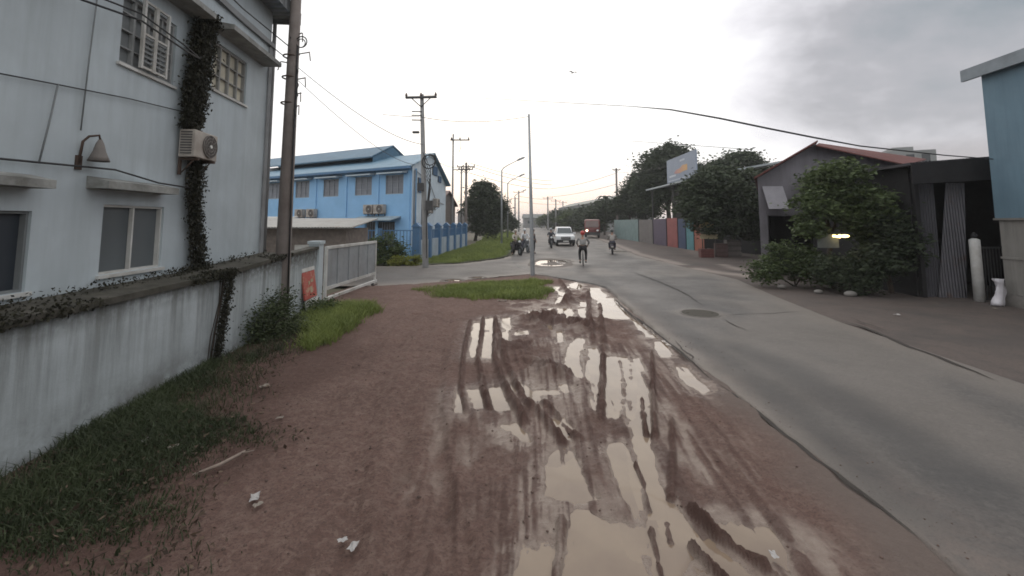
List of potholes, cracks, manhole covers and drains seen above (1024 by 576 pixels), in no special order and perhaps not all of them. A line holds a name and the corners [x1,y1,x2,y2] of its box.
pothole [528,258,575,268]
manhole cover [680,309,721,318]
